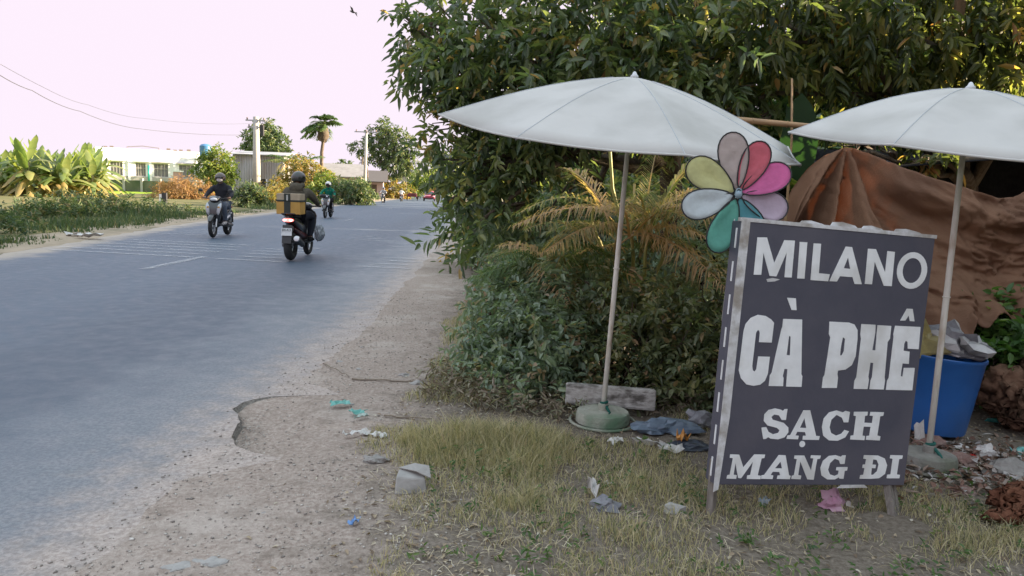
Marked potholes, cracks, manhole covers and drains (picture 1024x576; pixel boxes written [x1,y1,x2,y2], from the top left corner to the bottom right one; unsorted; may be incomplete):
pothole [232,395,376,457]
